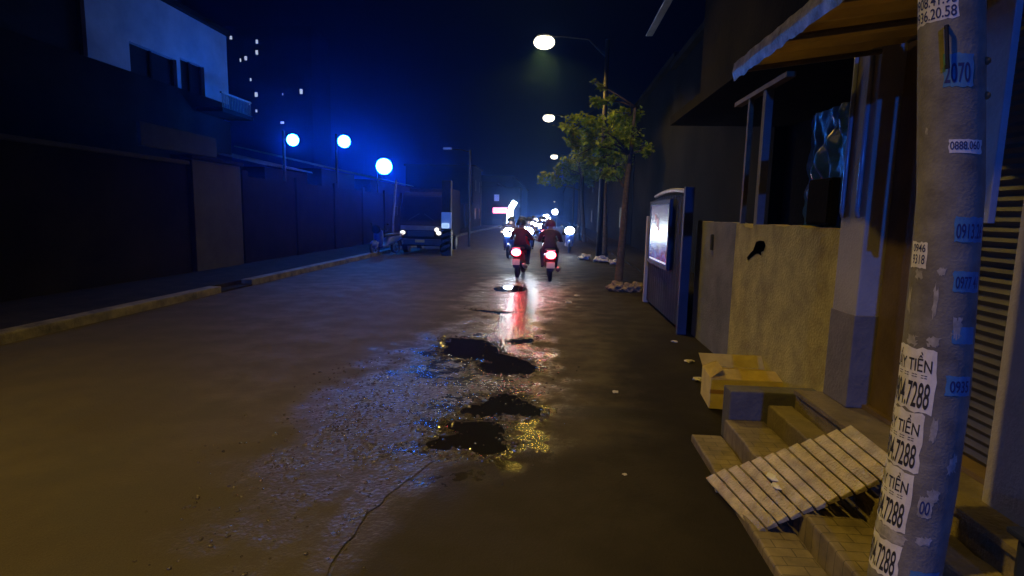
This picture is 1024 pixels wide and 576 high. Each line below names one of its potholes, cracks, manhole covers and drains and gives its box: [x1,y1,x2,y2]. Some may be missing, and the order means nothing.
pothole [408,414,526,462]
pothole [451,389,558,422]
pothole [429,335,548,378]
